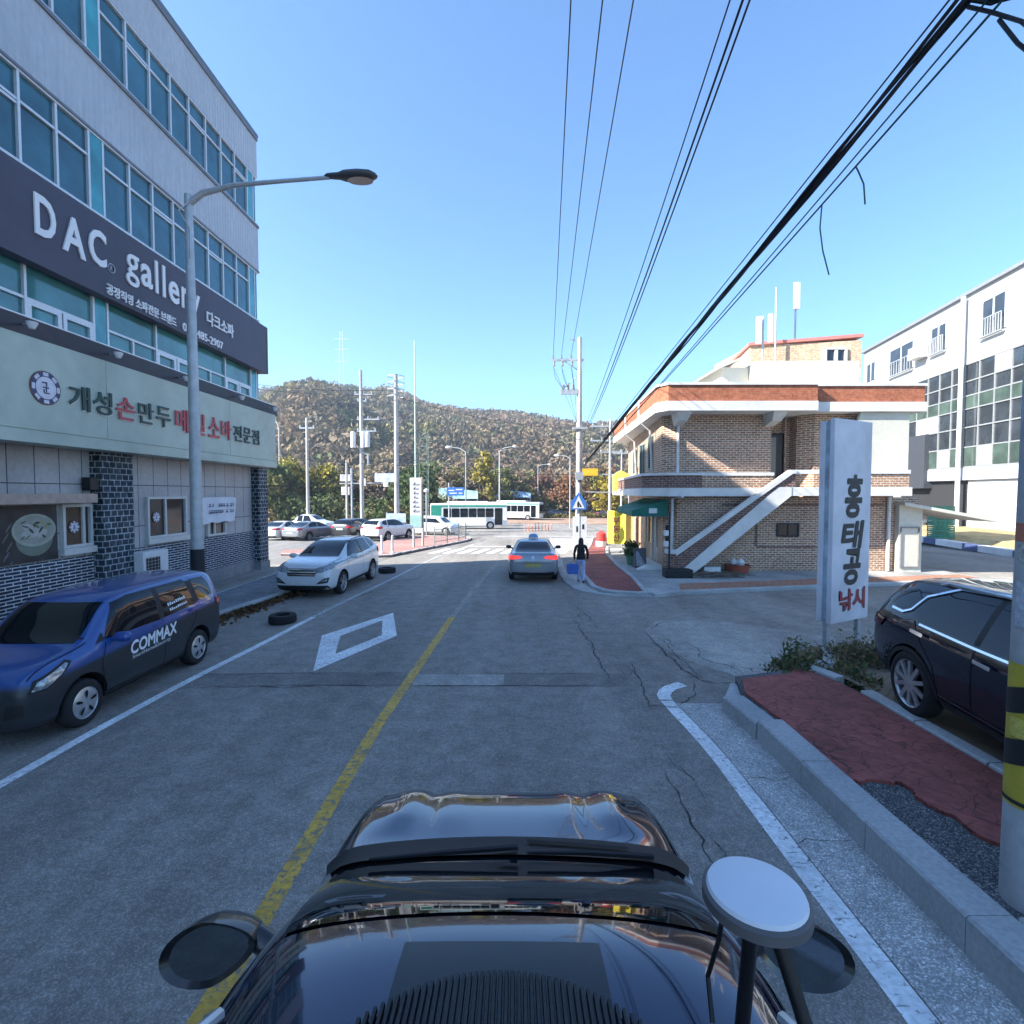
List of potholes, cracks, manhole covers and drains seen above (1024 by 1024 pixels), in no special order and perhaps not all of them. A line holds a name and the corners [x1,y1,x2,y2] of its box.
crack [664,752,726,863]
crack [188,607,772,707]
